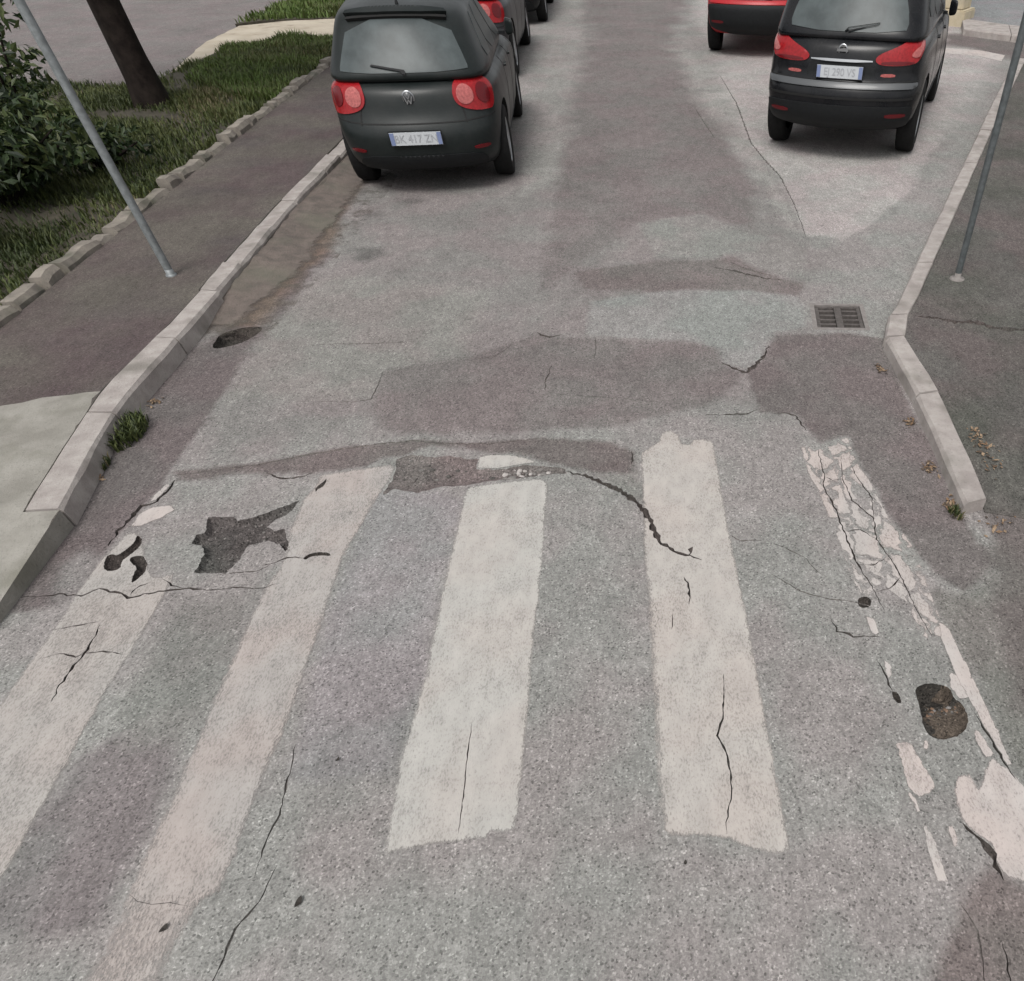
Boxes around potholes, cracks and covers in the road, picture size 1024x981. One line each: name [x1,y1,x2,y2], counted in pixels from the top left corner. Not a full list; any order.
crack [716,675,732,830]
pothole [213,327,262,348]
pothole [104,536,142,571]
crack [129,745,296,981]
crack [459,724,472,827]
crack [21,557,299,599]
pothole [192,501,299,574]
crack [720,76,805,234]
pothole [858,597,871,608]
pothole [915,683,968,740]
drain grate [809,303,870,330]
crack [723,346,769,373]
